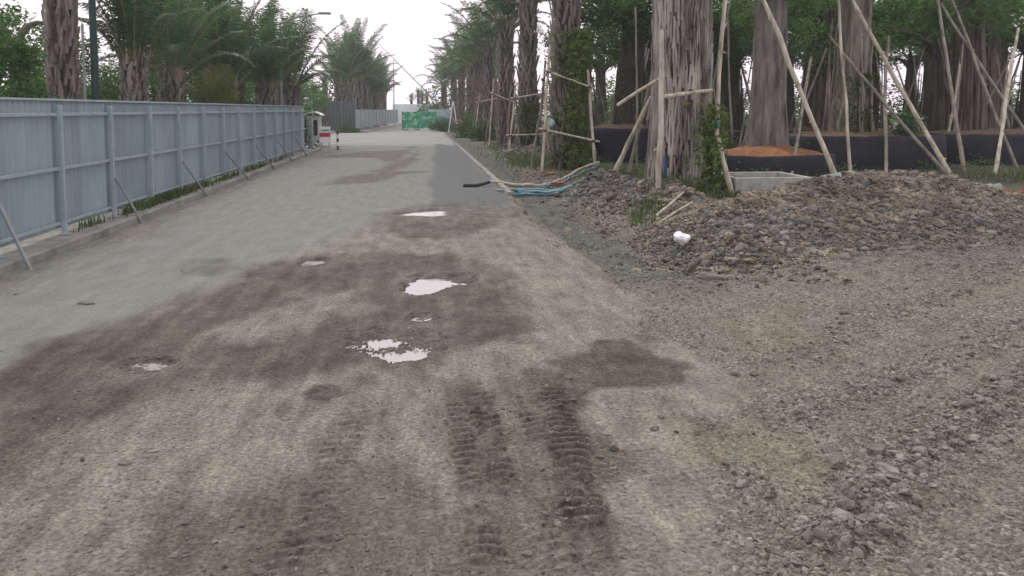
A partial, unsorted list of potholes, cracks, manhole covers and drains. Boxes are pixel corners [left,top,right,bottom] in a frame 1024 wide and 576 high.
pothole [104,354,186,374]
pothole [402,312,443,323]
pothole [310,323,466,369]
pothole [386,271,490,299]
pothole [291,256,336,267]
pothole [298,384,350,401]
